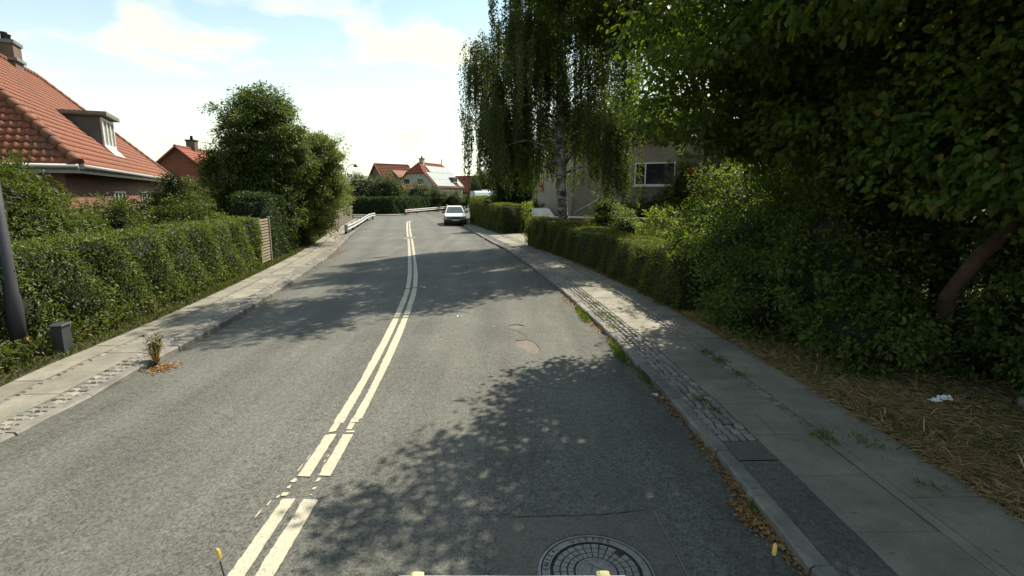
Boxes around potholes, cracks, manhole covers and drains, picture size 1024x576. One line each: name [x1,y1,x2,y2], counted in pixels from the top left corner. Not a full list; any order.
manhole cover [538,535,656,576]
